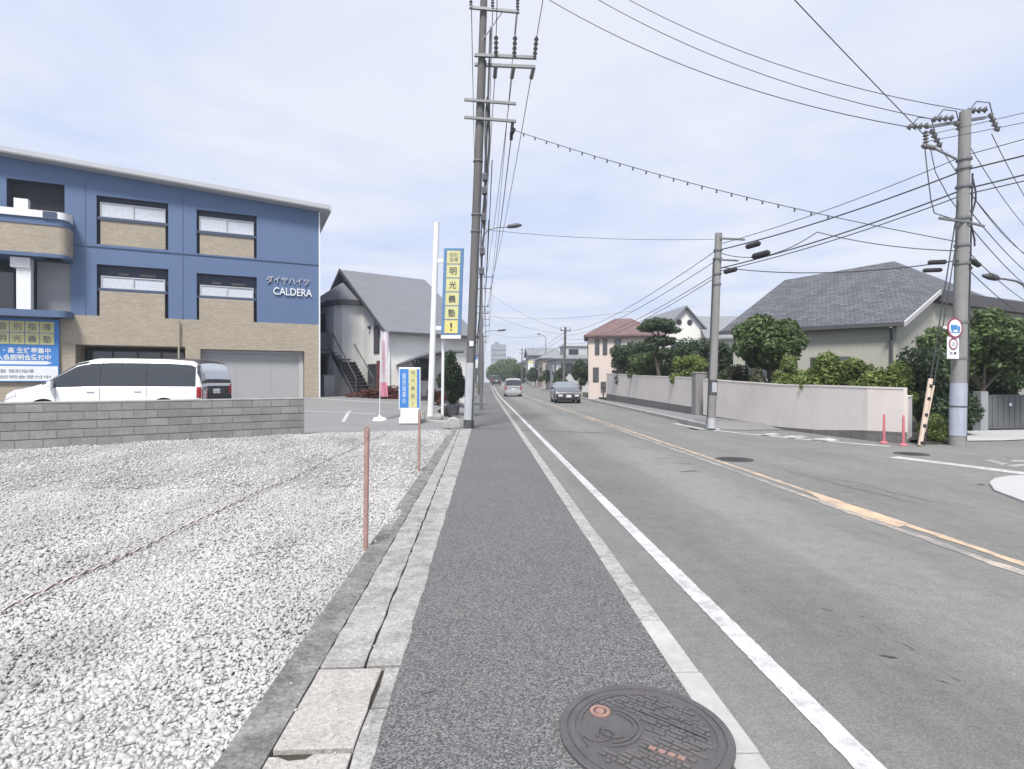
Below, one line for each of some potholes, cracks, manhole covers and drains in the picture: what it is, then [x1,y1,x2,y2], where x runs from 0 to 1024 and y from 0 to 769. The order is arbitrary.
manhole cover [559,685,736,769]
